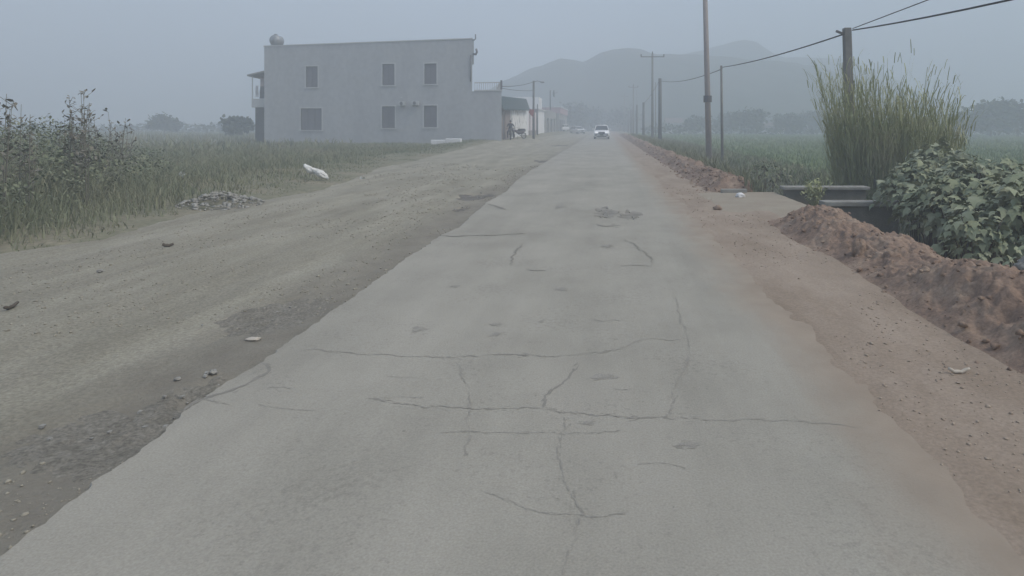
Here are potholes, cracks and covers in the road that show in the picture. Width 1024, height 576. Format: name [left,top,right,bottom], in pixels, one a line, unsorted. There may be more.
crack [308,298,863,575]
pothole [593,206,619,219]
crack [184,362,313,411]
crack [444,233,541,271]
pothole [617,209,643,219]
